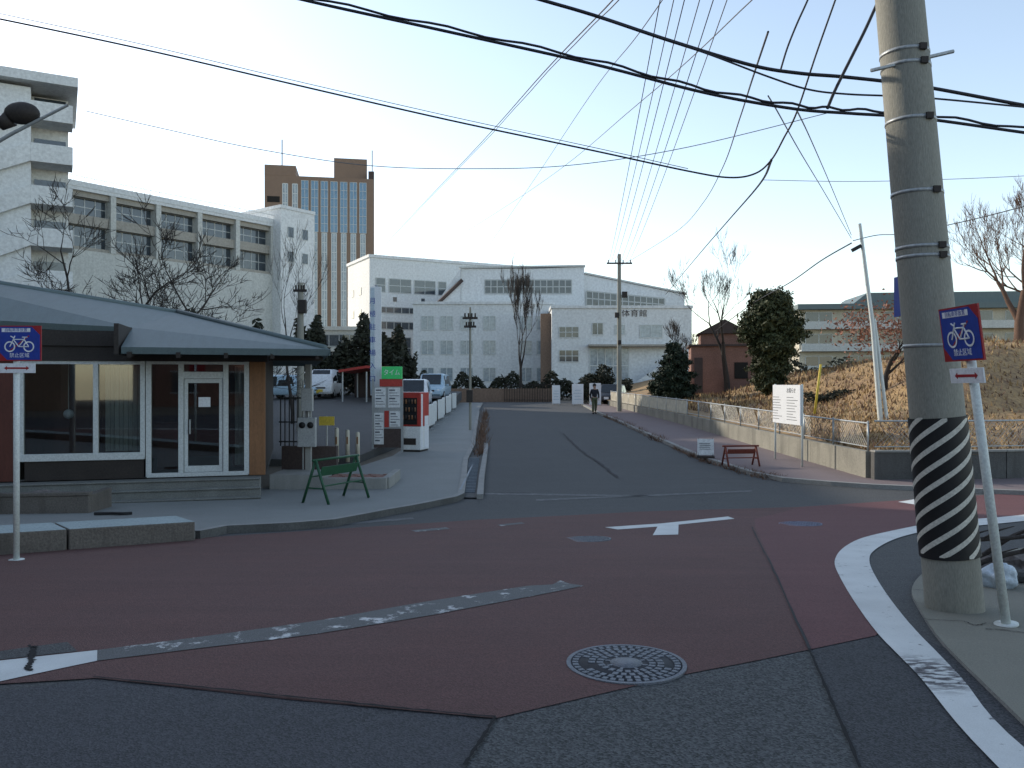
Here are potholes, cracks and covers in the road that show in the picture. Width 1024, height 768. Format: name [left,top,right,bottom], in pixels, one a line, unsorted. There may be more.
drain grate [459,458,479,493]
manhole cover [566,644,687,686]
crack [563,433,618,478]
